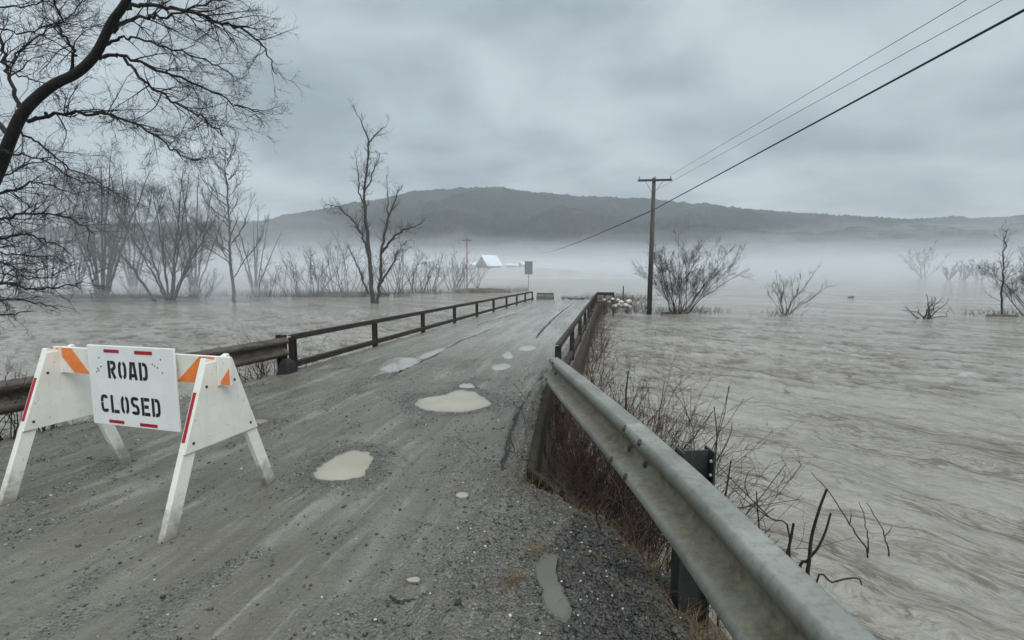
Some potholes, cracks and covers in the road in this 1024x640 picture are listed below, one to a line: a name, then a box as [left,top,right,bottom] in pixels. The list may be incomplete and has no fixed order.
pothole [410,389,497,414]
crack [535,305,571,339]
pothole [490,363,512,371]
pothole [535,553,572,624]
crack [500,375,543,471]
pothole [378,357,420,373]
pothole [416,348,446,359]
pothole [308,448,378,483]
